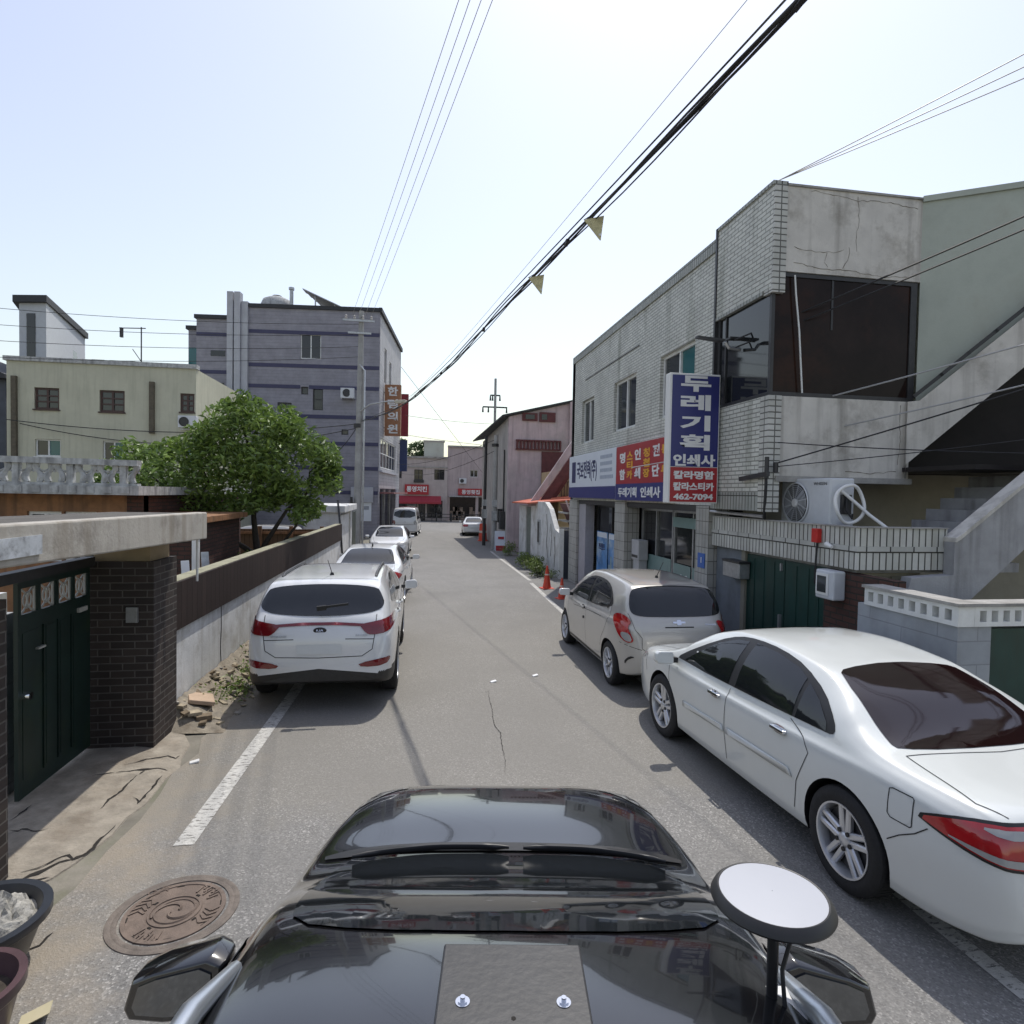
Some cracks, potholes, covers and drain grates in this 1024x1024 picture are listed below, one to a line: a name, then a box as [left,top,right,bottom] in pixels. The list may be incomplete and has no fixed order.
crack [96,755,180,809]
manhole cover [103,875,240,956]
crack [12,805,115,880]
